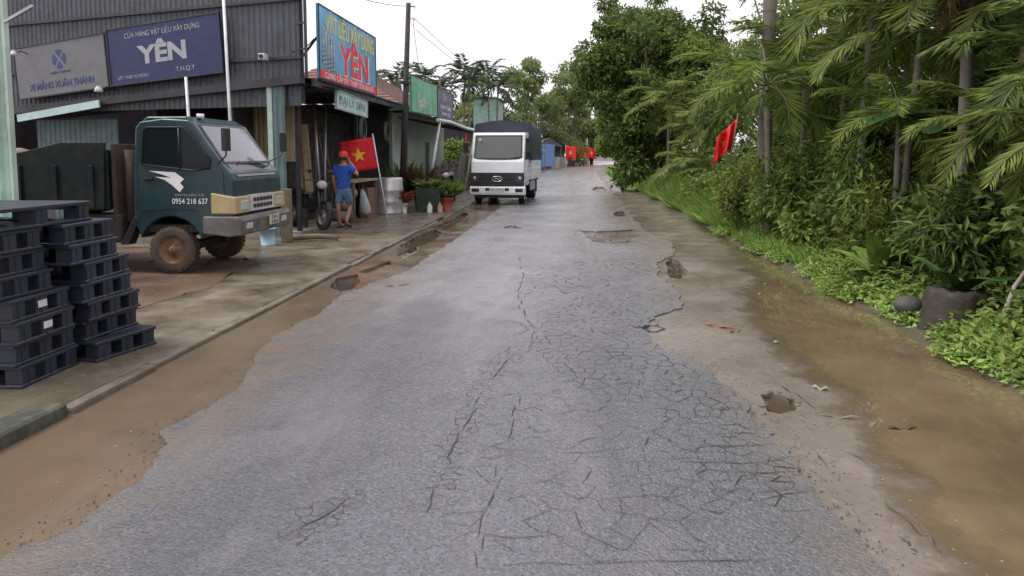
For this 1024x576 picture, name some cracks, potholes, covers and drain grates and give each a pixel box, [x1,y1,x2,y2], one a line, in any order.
pothole [666,257,686,281]
crack [424,257,837,566]
crack [278,490,366,545]
pothole [758,390,802,416]
pothole [575,229,640,246]
